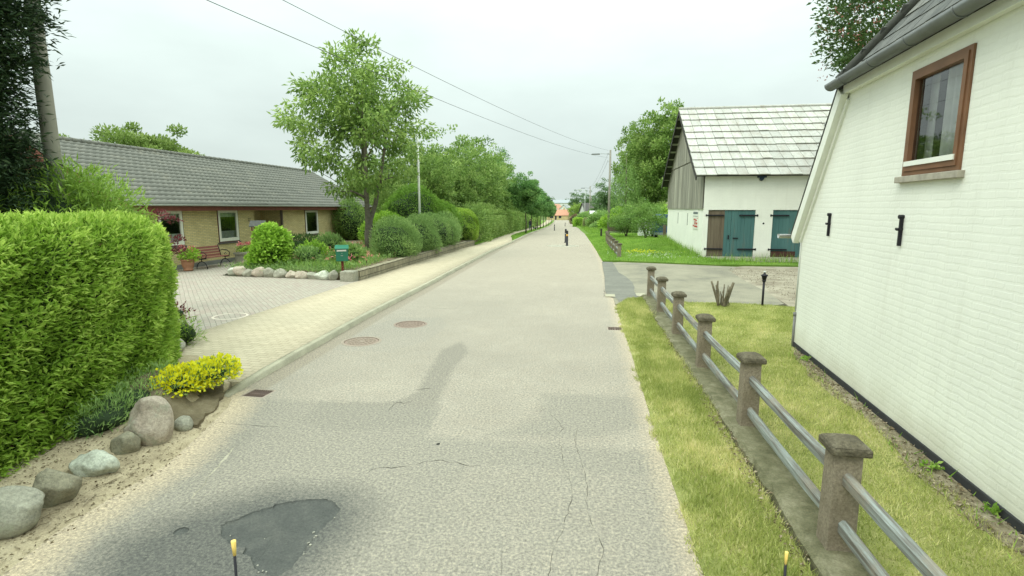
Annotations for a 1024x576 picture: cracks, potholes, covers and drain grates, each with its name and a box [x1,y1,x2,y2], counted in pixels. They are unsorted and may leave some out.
manhole cover [341,336,382,346]
drain grate [241,389,276,398]
crack [536,409,604,576]
